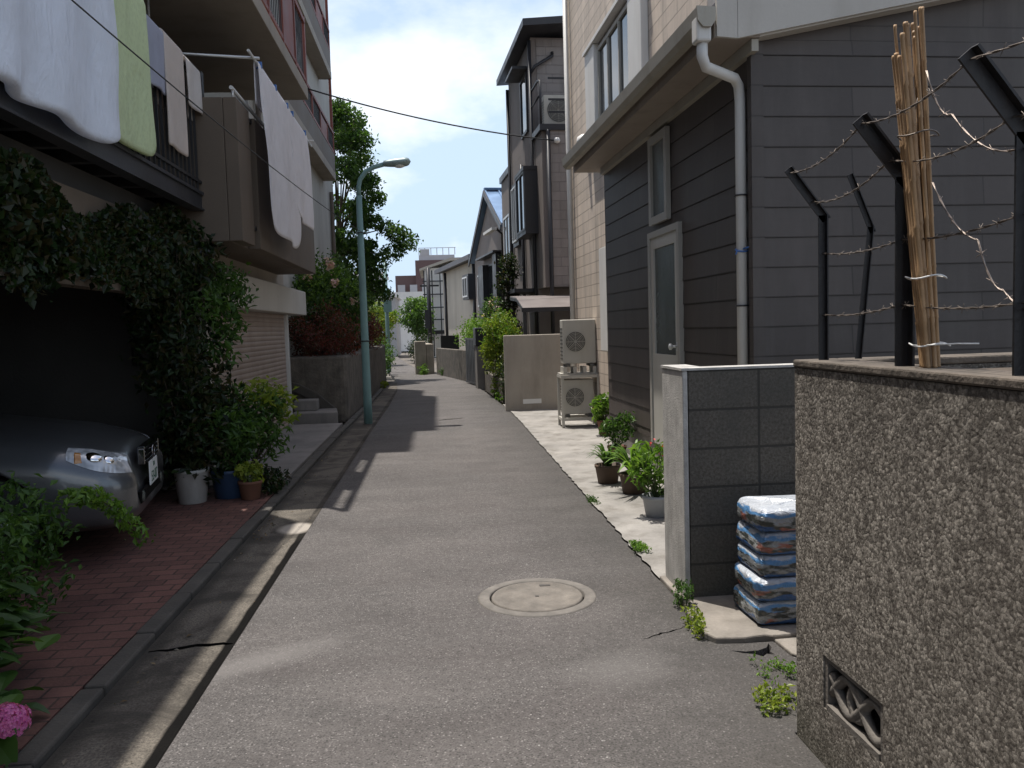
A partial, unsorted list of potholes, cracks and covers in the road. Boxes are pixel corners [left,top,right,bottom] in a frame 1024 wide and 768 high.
crack [735,643,774,656]
manhole cover [478,578,596,617]
crack [149,642,233,652]
